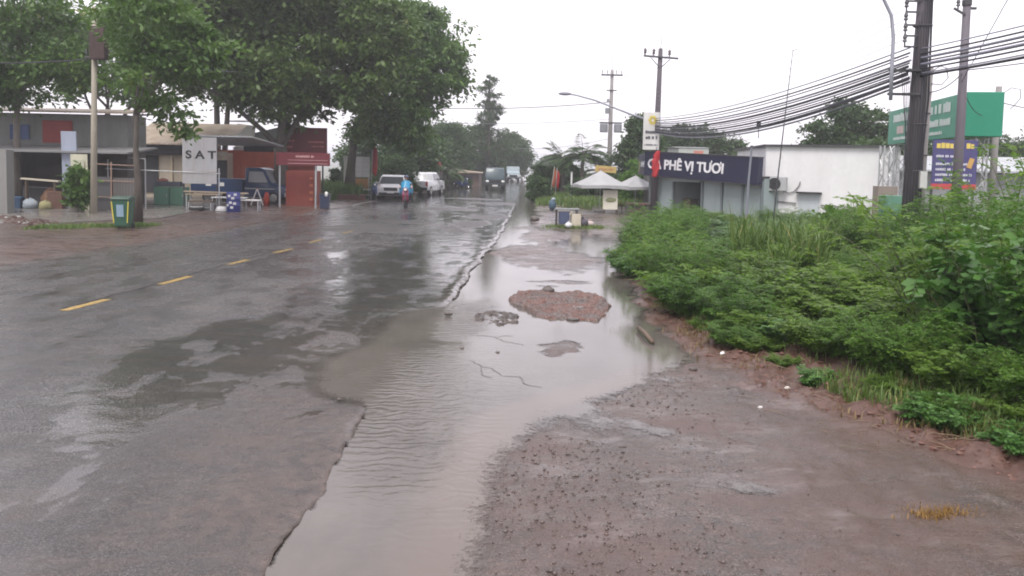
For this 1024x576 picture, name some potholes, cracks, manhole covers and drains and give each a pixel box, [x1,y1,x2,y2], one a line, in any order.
pothole [474,310,519,325]
